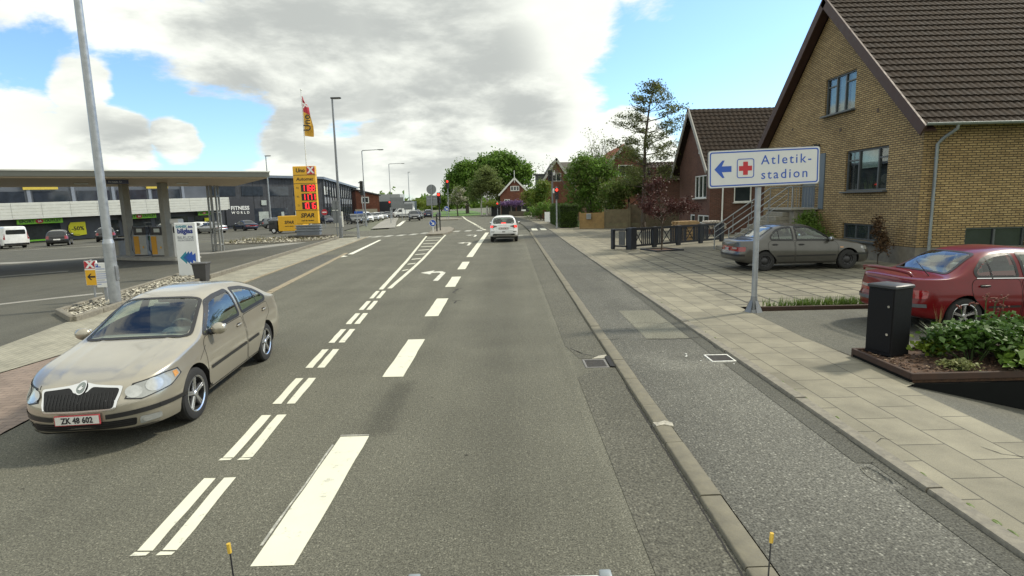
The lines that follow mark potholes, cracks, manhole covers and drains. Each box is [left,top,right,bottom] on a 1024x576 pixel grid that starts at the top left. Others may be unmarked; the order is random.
drain grate [582,355,615,368]
drain grate [704,354,737,362]
